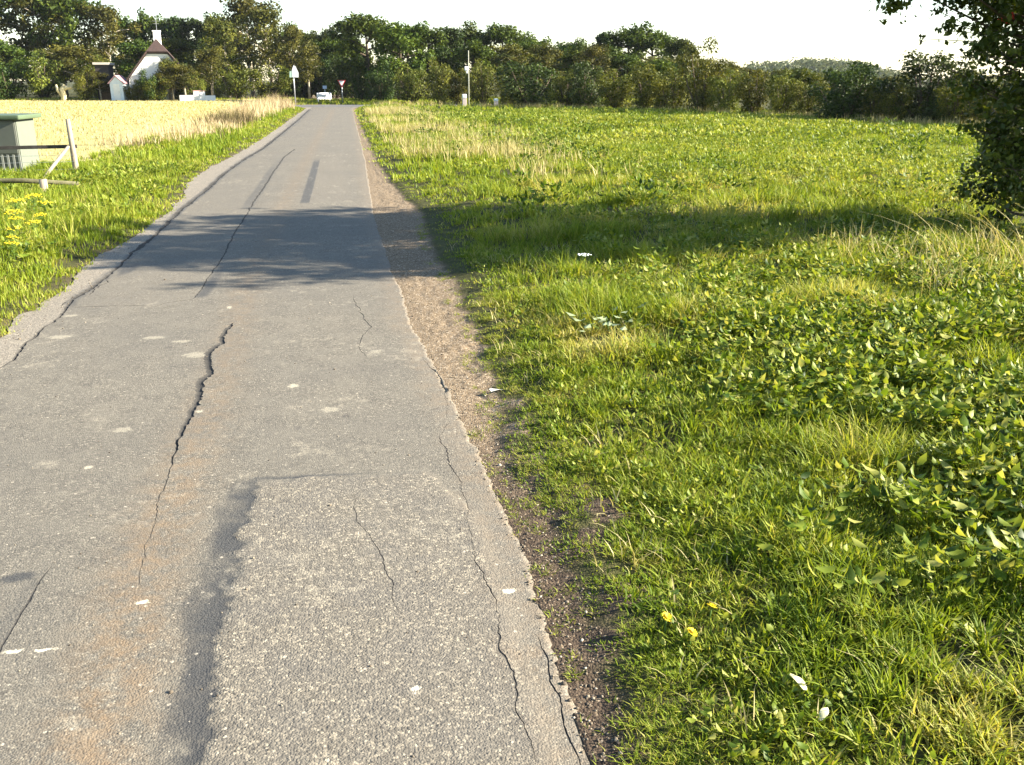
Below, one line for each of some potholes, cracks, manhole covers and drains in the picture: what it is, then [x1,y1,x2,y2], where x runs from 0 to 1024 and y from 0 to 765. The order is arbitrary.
crack [425,361,581,765]
crack [353,494,403,615]
crack [0,109,310,585]
